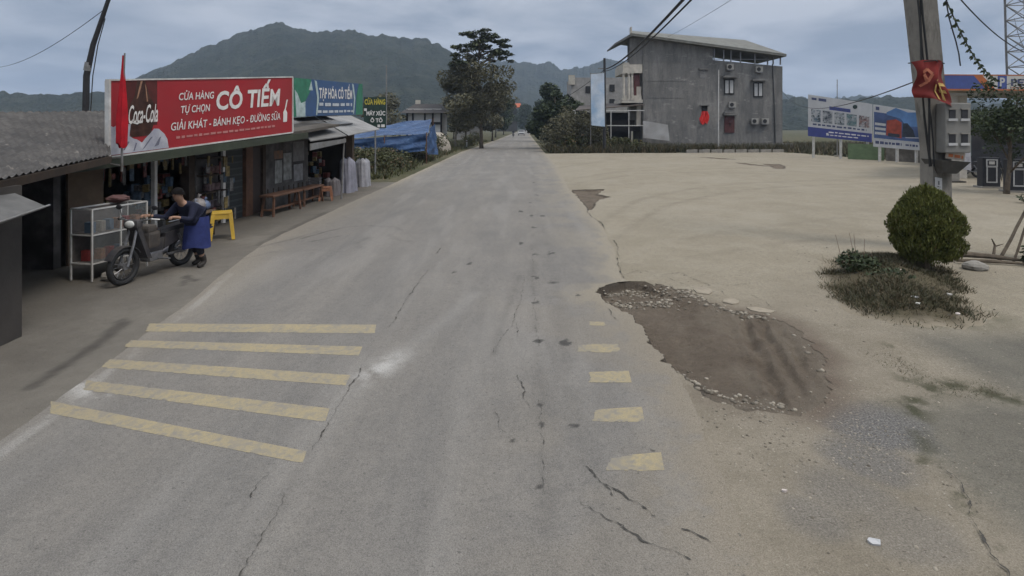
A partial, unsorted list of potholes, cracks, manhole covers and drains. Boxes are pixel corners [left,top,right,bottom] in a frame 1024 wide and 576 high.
crack [587,209,770,306]
crack [577,466,709,560]
pothole [571,189,609,210]
crack [493,259,544,495]
pothole [596,281,833,416]
crack [239,249,440,576]
crack [912,459,1010,576]
